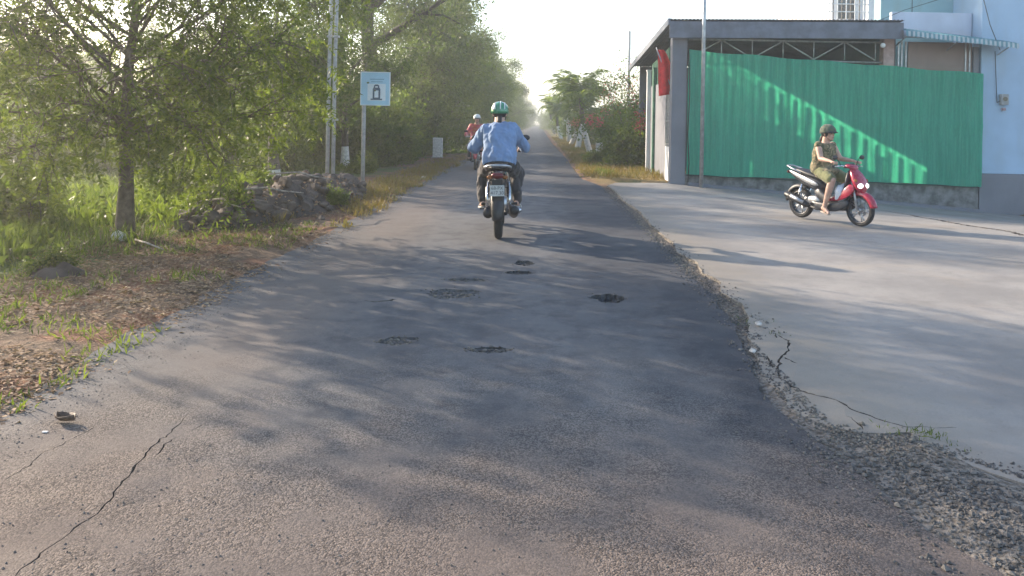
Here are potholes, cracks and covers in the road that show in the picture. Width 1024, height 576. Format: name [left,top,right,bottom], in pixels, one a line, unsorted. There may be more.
pothole [588,293,628,303]
pothole [373,335,420,346]
pothole [463,345,515,354]
crack [767,329,956,429]
pothole [420,287,482,299]
crack [2,410,202,576]
